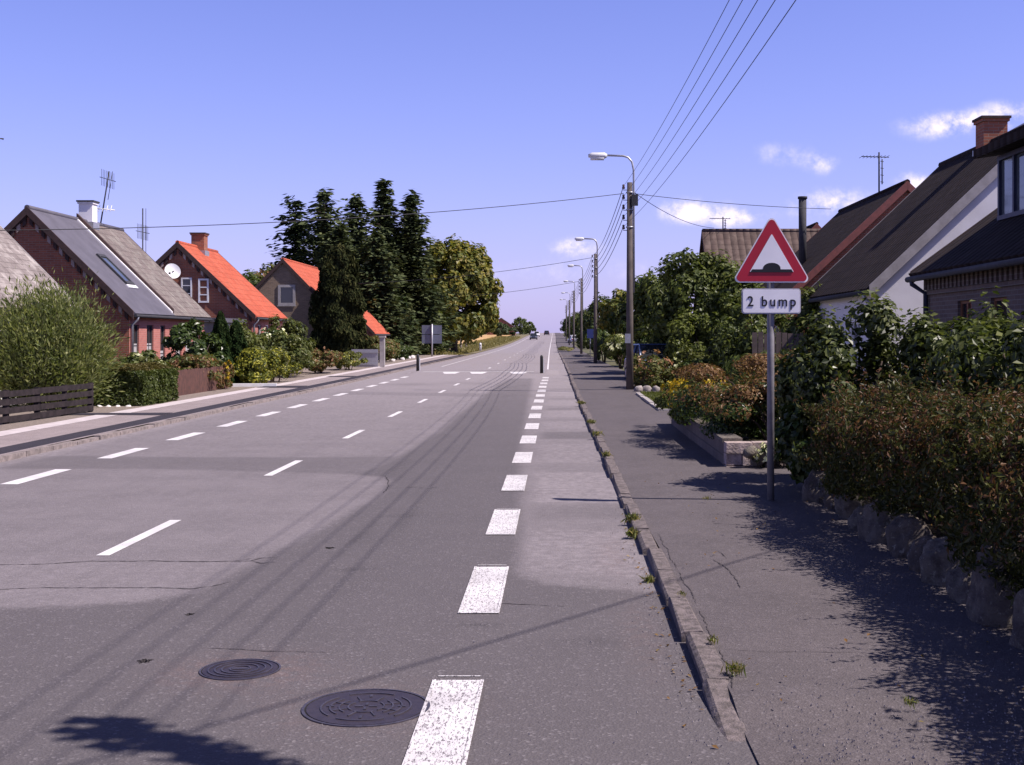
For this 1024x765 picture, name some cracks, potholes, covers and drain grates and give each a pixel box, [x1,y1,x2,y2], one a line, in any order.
manhole cover [199,658,281,681]
manhole cover [301,688,430,728]
